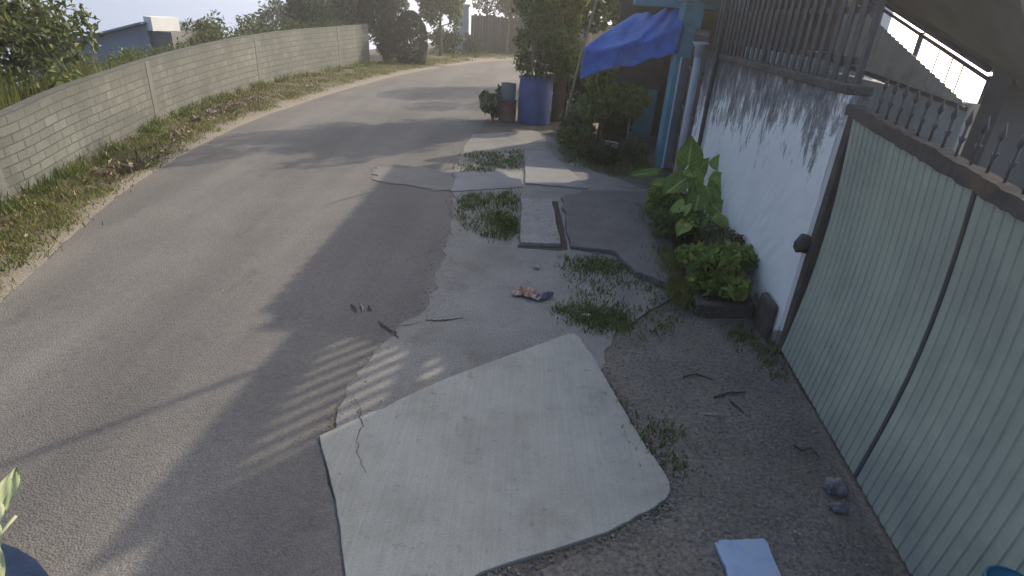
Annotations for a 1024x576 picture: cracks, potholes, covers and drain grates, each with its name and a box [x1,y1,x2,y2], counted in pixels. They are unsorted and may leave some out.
crack [353,394,396,471]
crack [378,317,462,338]
